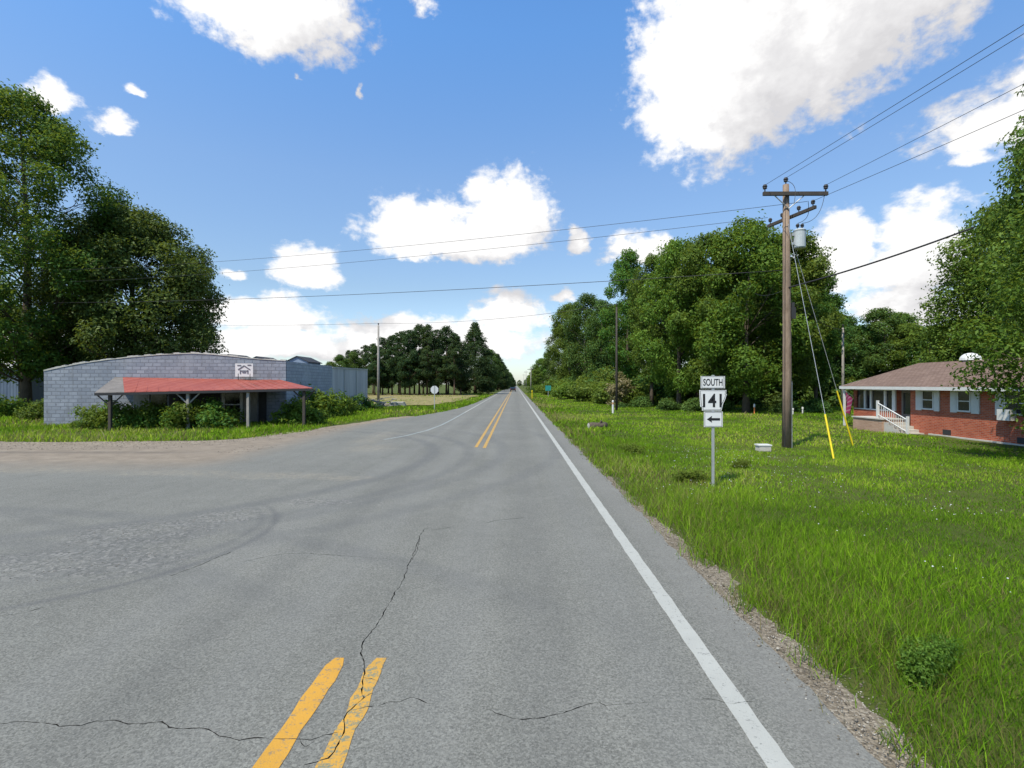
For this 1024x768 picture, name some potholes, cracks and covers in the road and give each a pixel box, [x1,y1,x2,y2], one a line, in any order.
crack [1,528,444,765]
crack [491,702,644,720]
